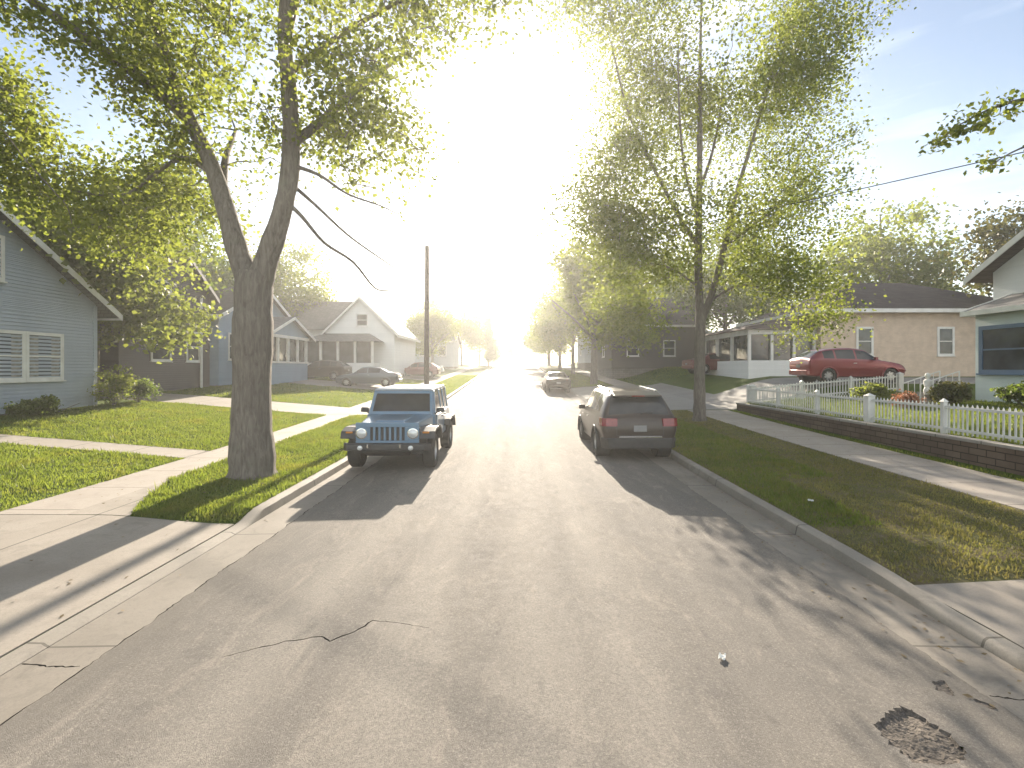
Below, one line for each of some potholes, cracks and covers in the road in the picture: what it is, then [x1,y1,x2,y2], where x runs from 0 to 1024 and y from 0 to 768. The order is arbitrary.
pothole [873,705,967,765]
crack [224,620,427,657]
